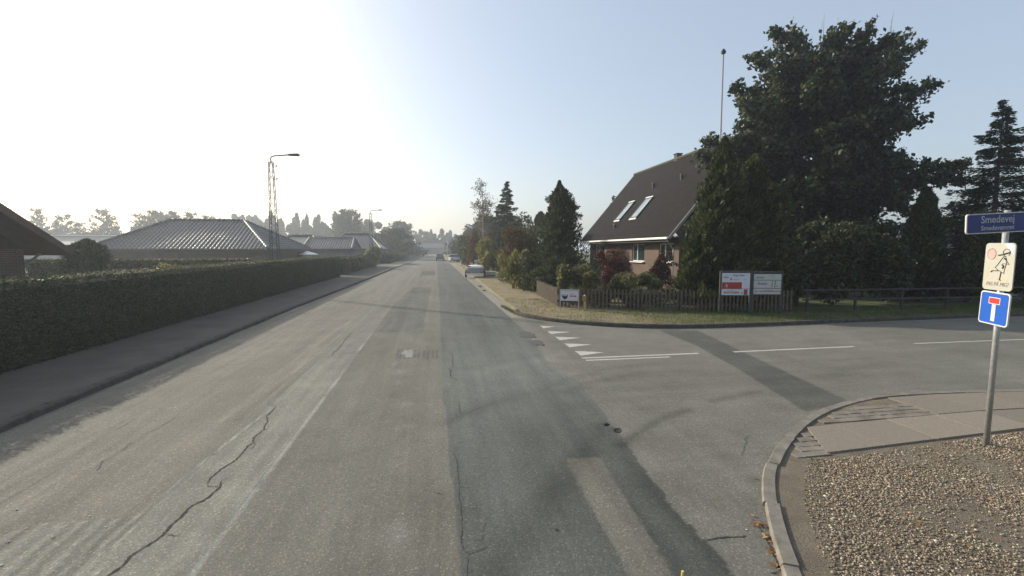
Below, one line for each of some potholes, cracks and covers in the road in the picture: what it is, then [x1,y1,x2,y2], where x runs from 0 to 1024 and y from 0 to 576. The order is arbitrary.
crack [429,454,487,576]
crack [107,403,276,576]
